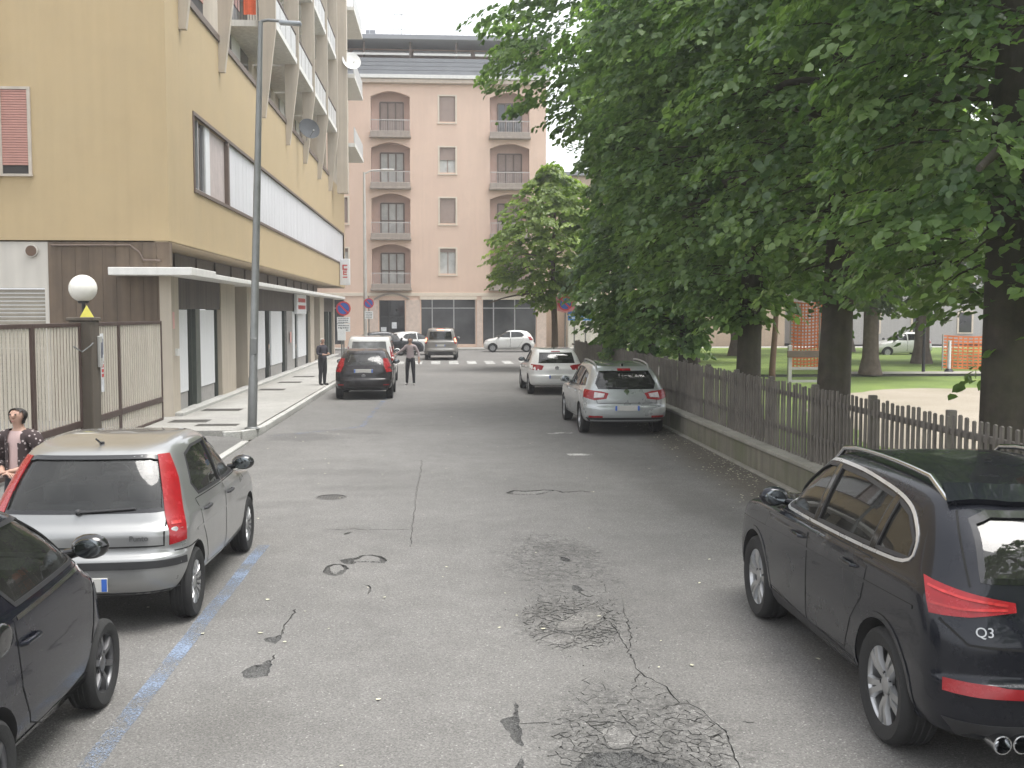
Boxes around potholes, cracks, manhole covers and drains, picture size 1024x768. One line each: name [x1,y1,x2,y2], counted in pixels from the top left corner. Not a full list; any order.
pothole [241,660,273,679]
crack [510,535,754,768]
pothole [323,564,349,576]
pothole [500,702,524,746]
pothole [340,555,387,564]
